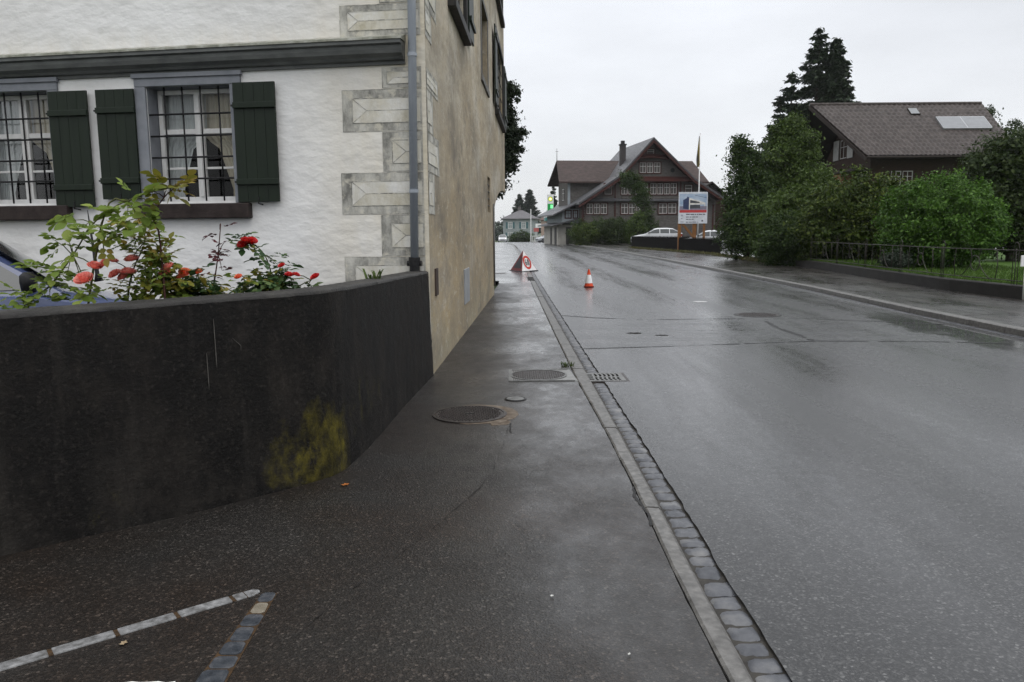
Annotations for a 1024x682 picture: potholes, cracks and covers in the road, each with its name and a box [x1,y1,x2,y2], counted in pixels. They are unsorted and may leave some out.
manhole cover [509,369,578,382]
drain grate [586,373,630,383]
manhole cover [432,404,519,426]
